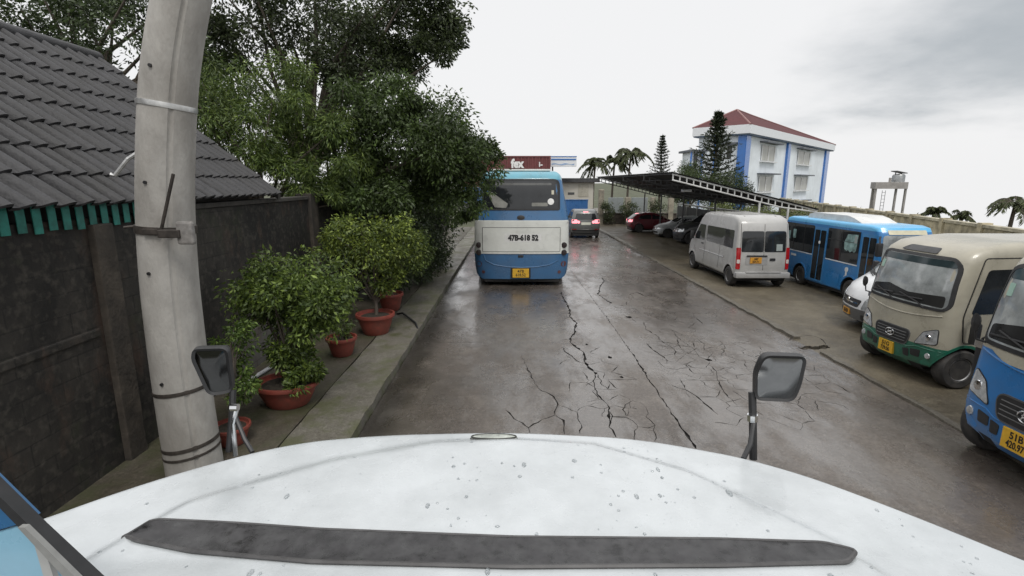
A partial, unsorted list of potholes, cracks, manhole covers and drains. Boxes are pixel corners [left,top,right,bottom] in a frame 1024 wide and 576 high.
crack [597,278,849,430]
crack [506,293,657,440]
